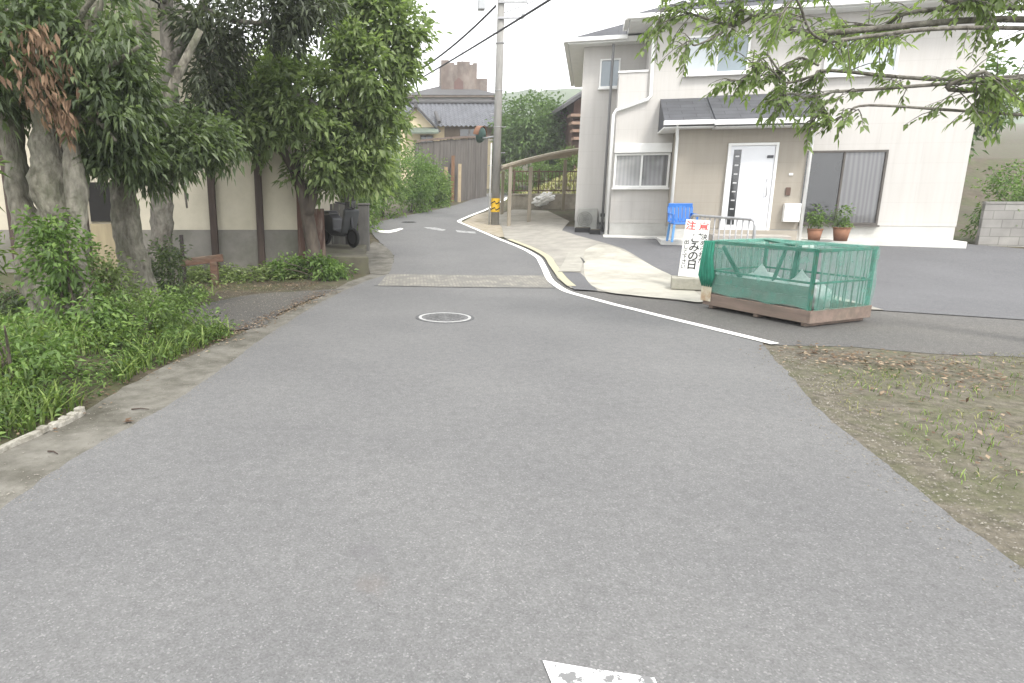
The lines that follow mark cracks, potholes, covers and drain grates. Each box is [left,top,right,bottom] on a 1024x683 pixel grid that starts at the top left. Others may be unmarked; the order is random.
manhole cover [416,312,474,323]
